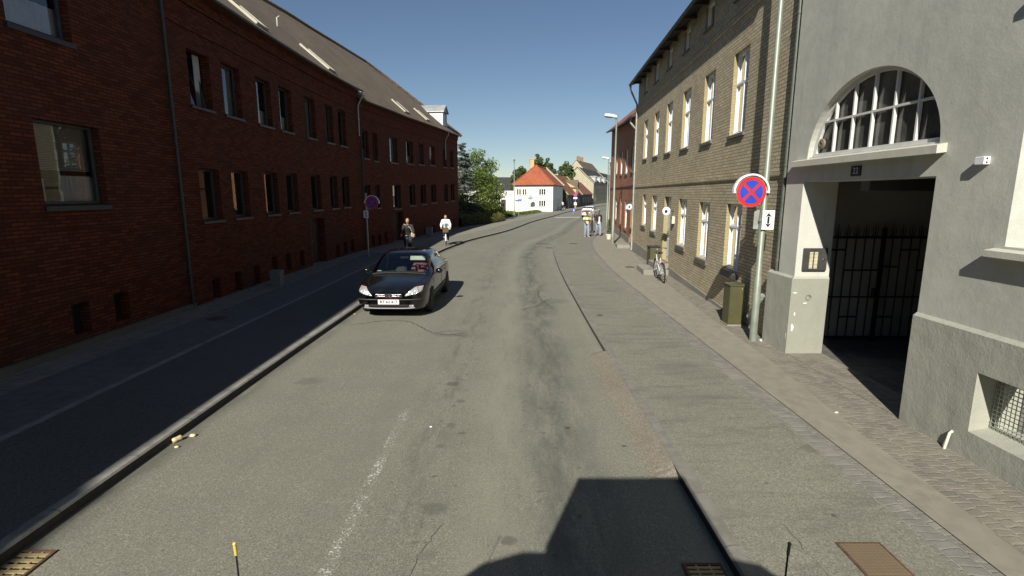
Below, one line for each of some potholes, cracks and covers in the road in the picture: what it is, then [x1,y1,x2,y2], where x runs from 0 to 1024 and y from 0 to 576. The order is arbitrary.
drain grate [682,563,728,576]
crack [352,320,460,336]
drain grate [0,550,58,576]
manhole cover [835,542,915,576]
